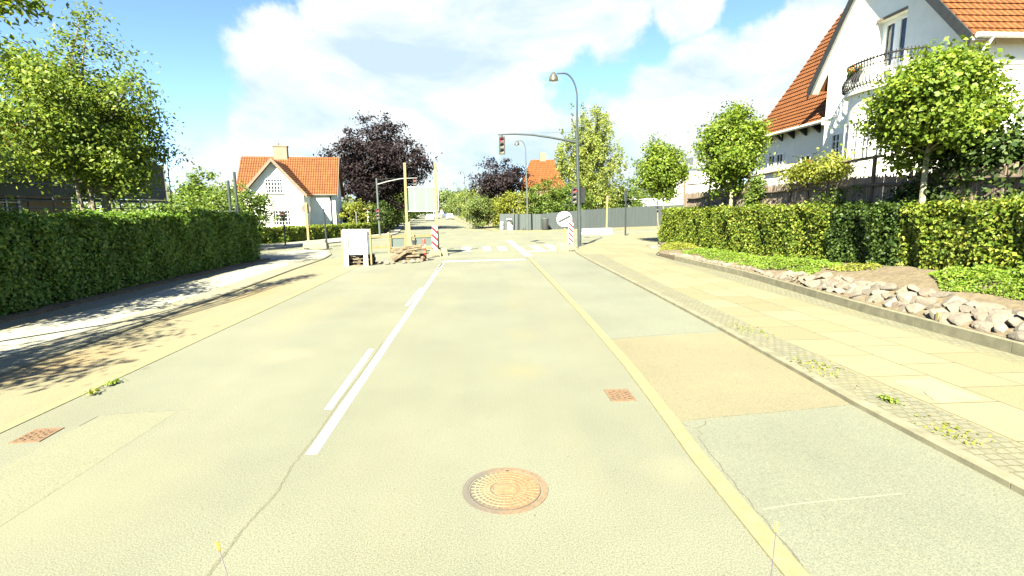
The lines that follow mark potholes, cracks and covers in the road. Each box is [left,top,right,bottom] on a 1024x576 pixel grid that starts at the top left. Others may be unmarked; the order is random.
drain grate [604,389,637,402]
manhole cover [462,467,548,515]
crack [681,420,807,571]
drain grate [8,427,65,444]
